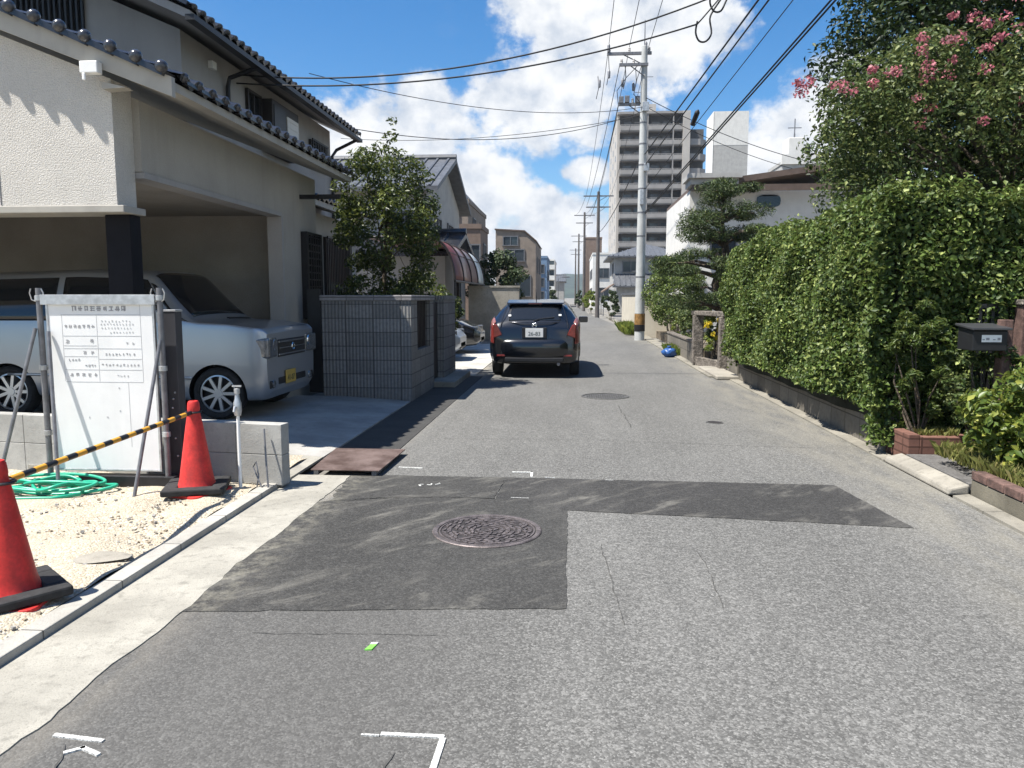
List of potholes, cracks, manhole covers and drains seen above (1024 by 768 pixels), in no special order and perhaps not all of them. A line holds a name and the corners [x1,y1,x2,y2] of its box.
manhole cover [432,514,542,548]
crack [601,544,625,625]
